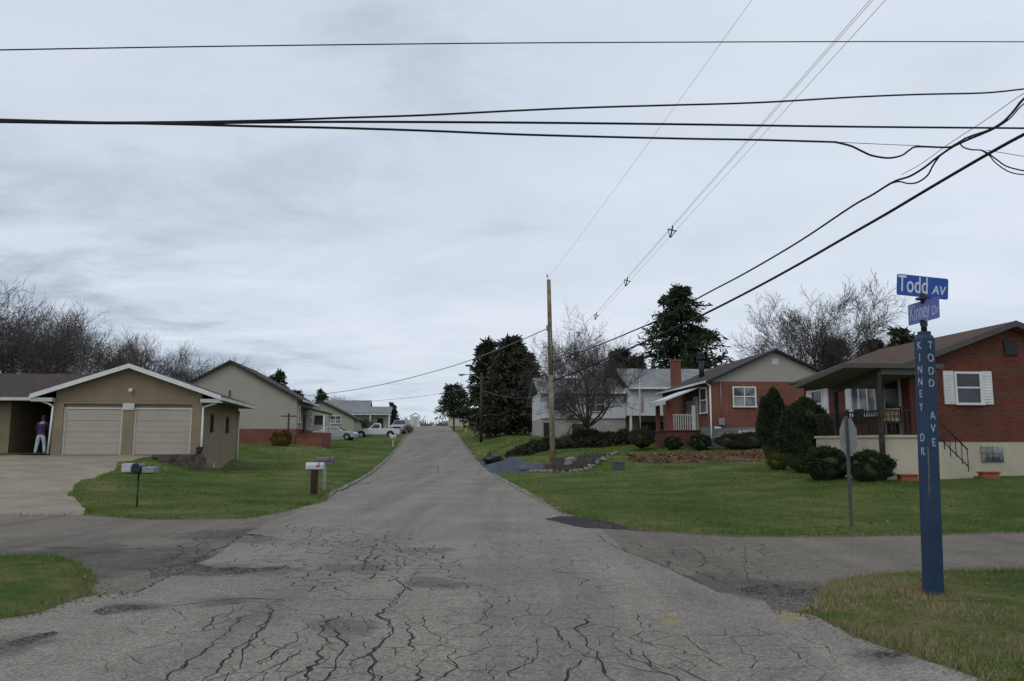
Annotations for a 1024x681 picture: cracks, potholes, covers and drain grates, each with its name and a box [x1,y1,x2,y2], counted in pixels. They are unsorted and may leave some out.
pothole [736,584,823,610]
crack [59,523,833,681]
